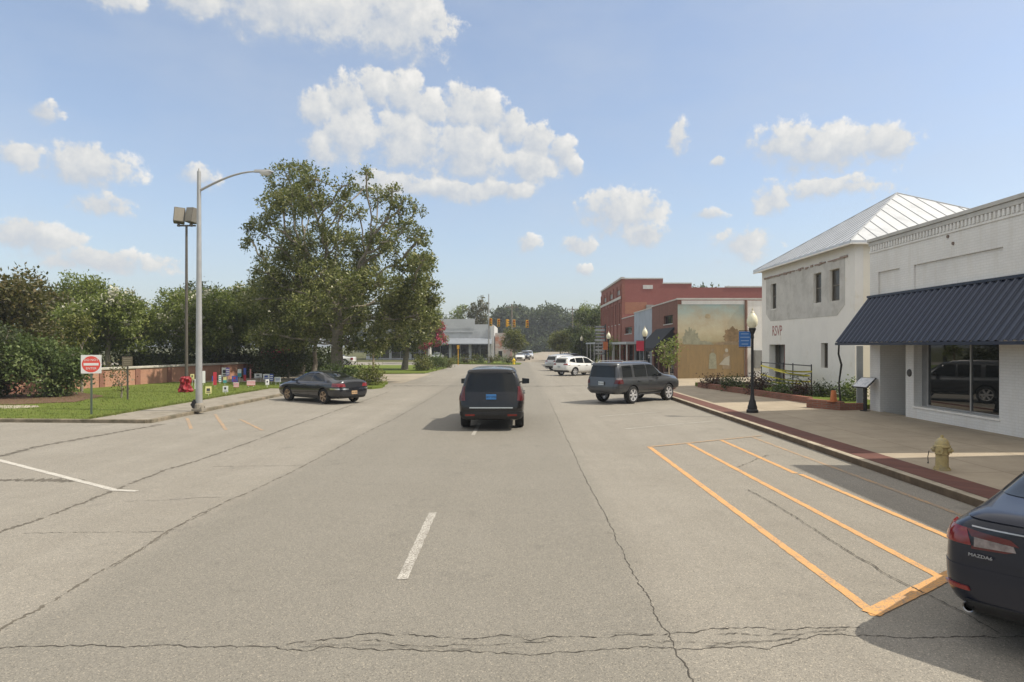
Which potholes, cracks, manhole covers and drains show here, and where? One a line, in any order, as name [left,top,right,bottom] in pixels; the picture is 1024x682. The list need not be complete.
crack [2,408,1023,682]
